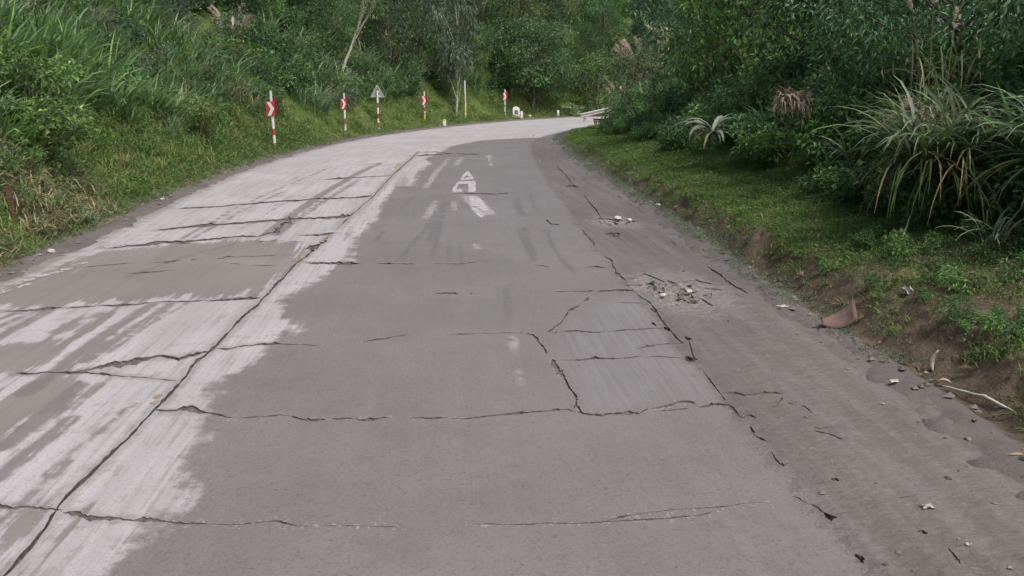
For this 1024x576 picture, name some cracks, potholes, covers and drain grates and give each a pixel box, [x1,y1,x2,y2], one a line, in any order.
pothole [623,273,724,309]
crack [0,152,846,576]
pothole [592,218,636,226]
